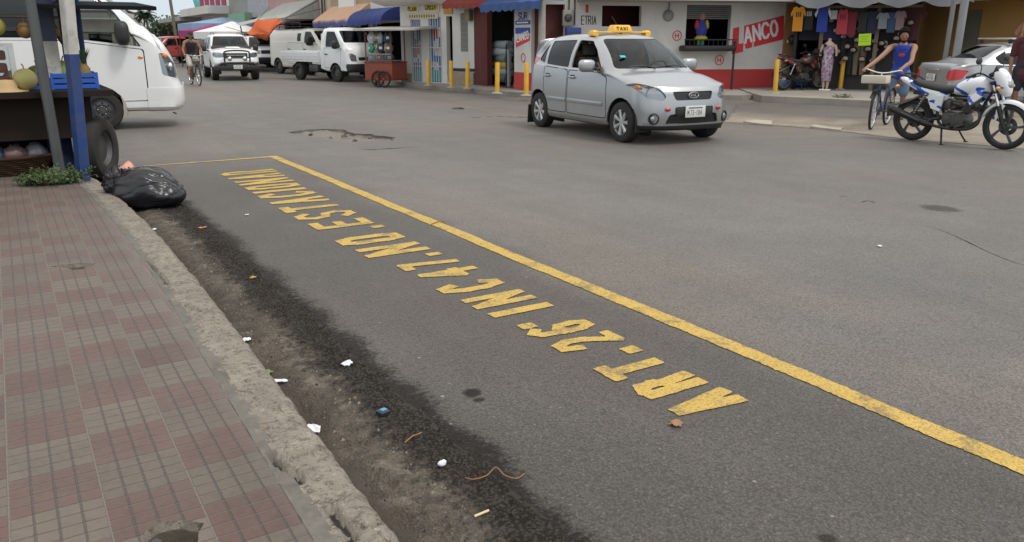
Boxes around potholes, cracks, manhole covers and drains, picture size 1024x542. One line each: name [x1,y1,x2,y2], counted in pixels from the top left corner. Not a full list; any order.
pothole [289,129,396,142]
crack [927,226,1023,265]
